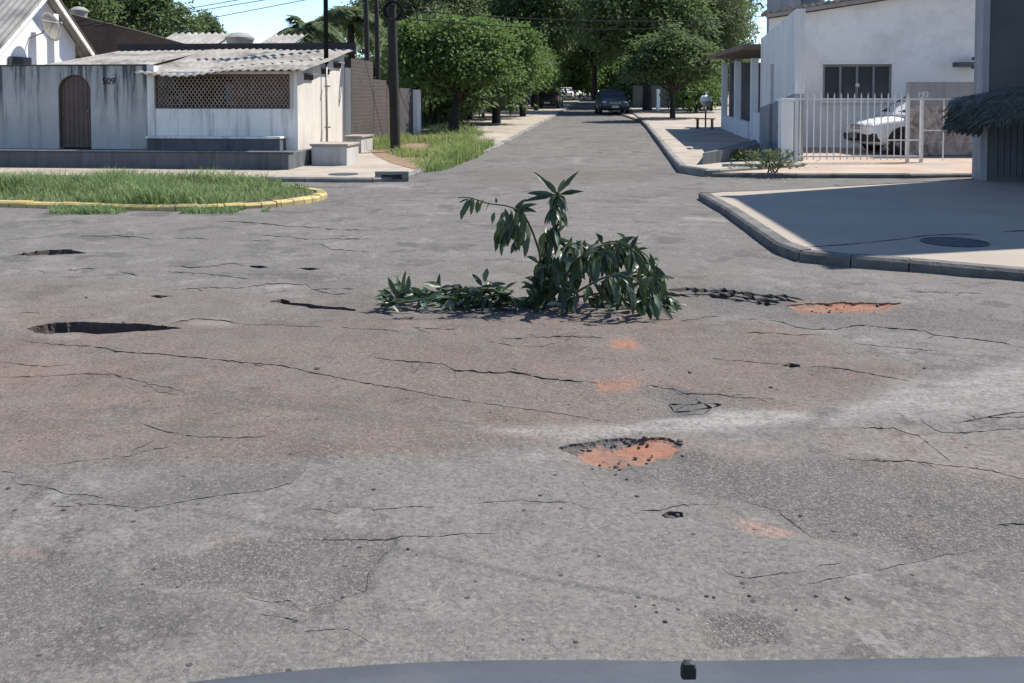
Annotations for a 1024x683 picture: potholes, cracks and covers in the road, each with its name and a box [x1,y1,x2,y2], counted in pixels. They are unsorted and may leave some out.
crack [63,422,266,464]
drain grate [375,171,409,182]
pothole [558,435,683,470]
crack [312,506,433,515]
crack [641,504,715,518]
crack [225,221,364,253]
crack [487,334,600,347]
crack [722,545,984,587]
pothole [785,302,901,313]
crack [171,318,319,327]
crack [650,385,769,416]
crack [342,312,454,333]
